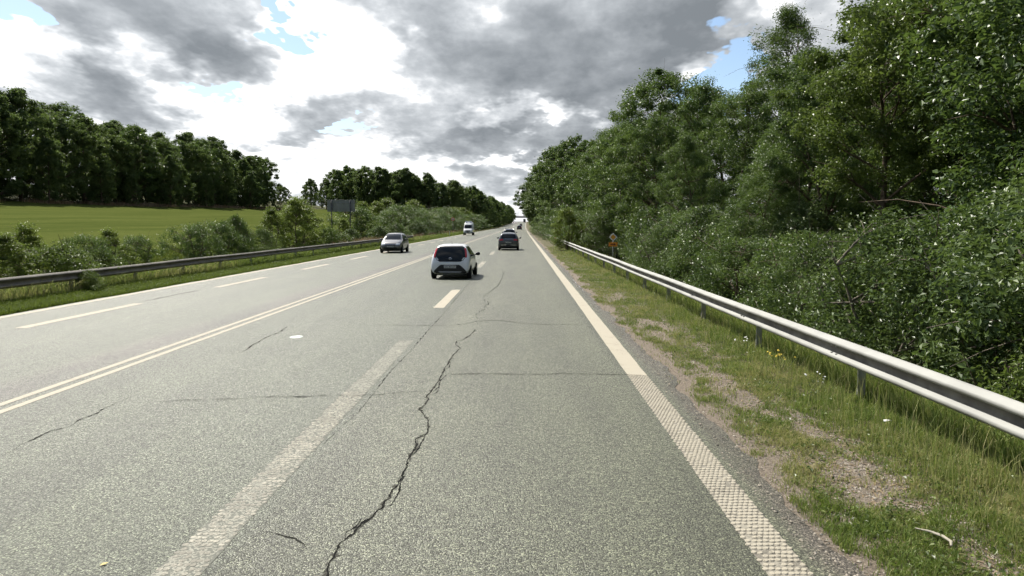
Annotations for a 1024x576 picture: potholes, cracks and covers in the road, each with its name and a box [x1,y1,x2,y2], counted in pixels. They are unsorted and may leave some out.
crack [8,273,628,576]
